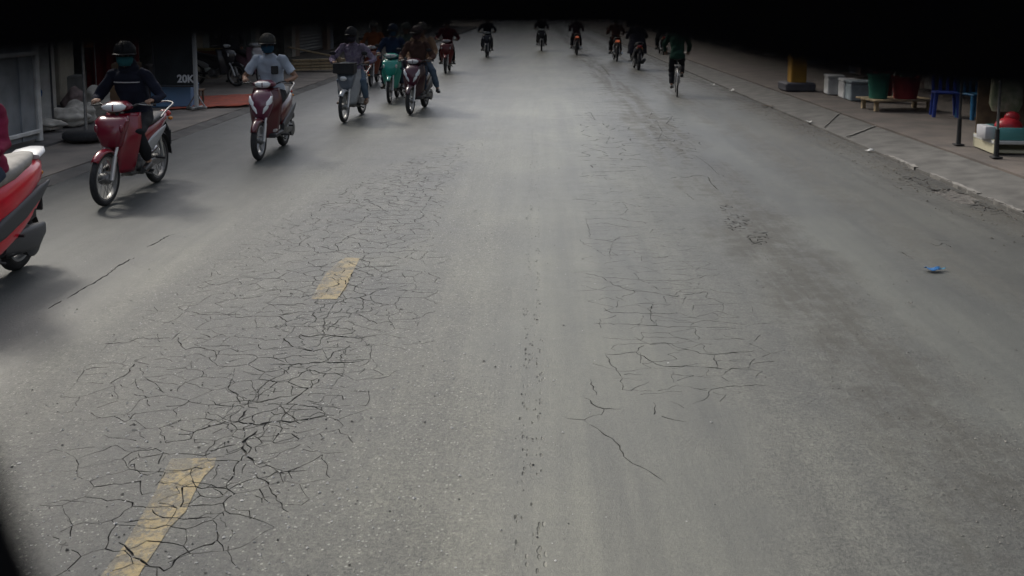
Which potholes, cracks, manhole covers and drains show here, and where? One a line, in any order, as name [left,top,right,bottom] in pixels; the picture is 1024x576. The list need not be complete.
crack [40,143,483,576]
crack [582,65,767,245]
crack [564,166,785,480]
crack [896,173,936,192]
